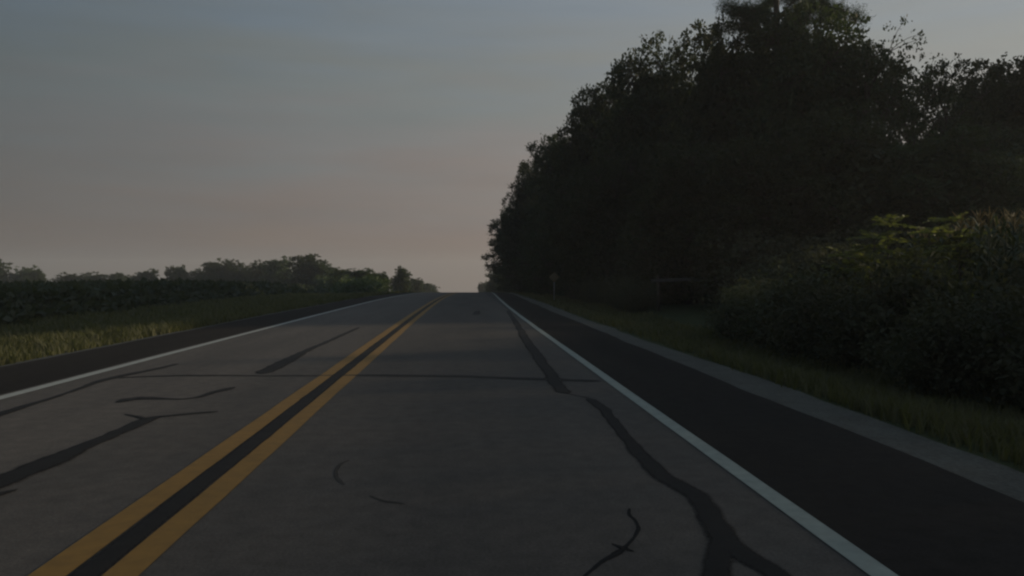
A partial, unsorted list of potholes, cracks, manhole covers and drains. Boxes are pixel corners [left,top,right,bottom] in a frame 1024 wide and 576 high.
crack [334,460,349,485]
crack [583,508,641,576]
crack [369,495,404,504]
